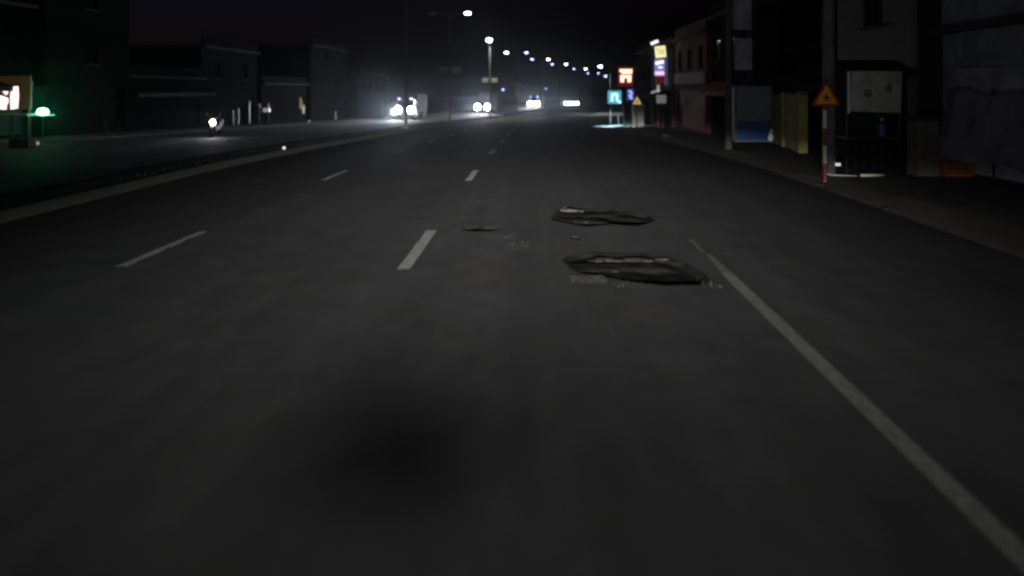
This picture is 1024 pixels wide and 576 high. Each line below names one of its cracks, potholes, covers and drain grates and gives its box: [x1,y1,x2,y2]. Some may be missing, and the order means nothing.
pothole [551,206,655,226]
pothole [562,252,709,286]
